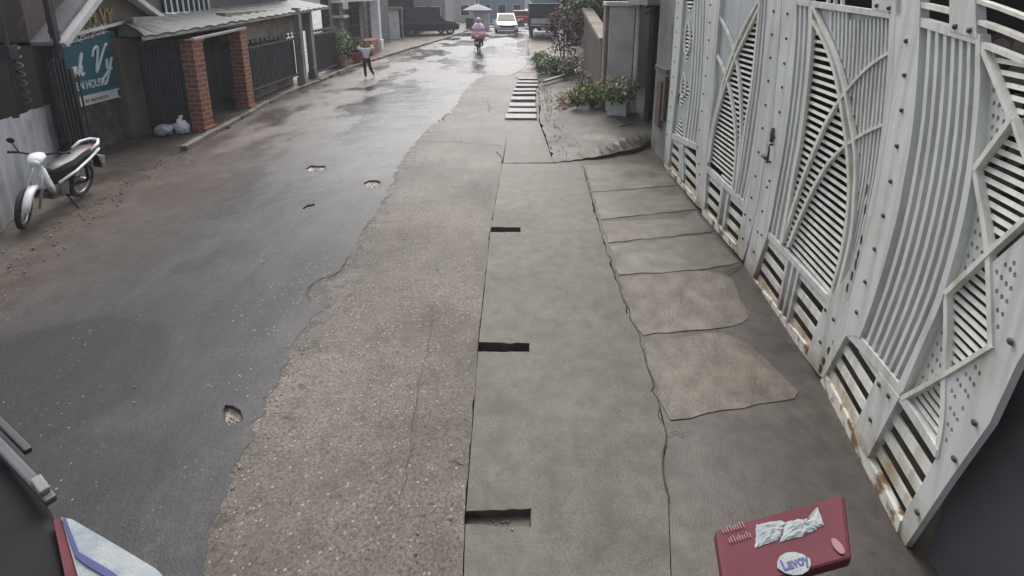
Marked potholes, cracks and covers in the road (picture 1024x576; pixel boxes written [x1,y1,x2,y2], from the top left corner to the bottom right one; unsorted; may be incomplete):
crack [582,166,690,510]
pothole [223,405,243,426]
crack [396,308,434,520]
pothole [364,180,381,188]
